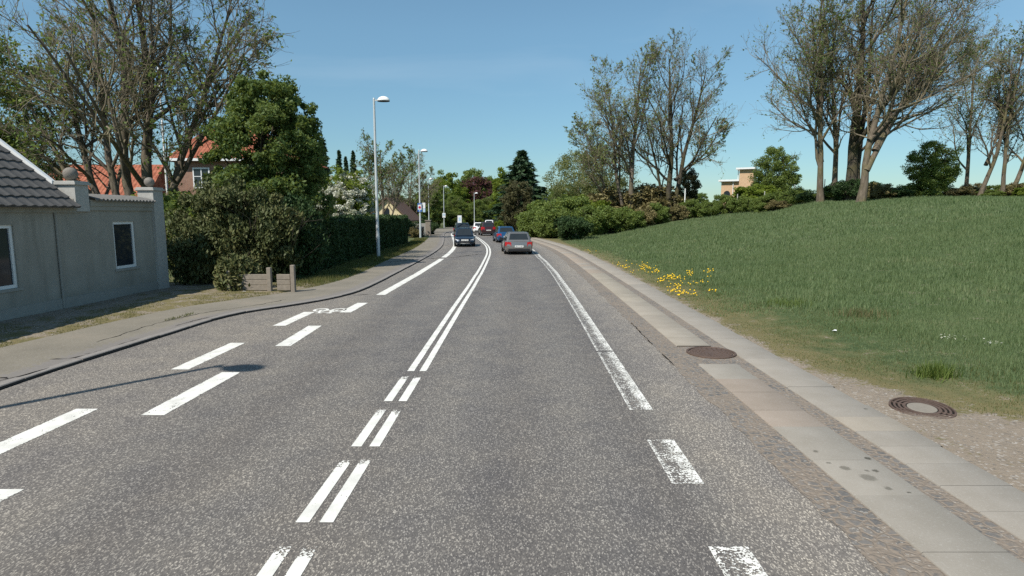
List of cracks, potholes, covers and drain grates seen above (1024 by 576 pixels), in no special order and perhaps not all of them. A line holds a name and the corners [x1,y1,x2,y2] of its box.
manhole cover [686,346,737,359]
